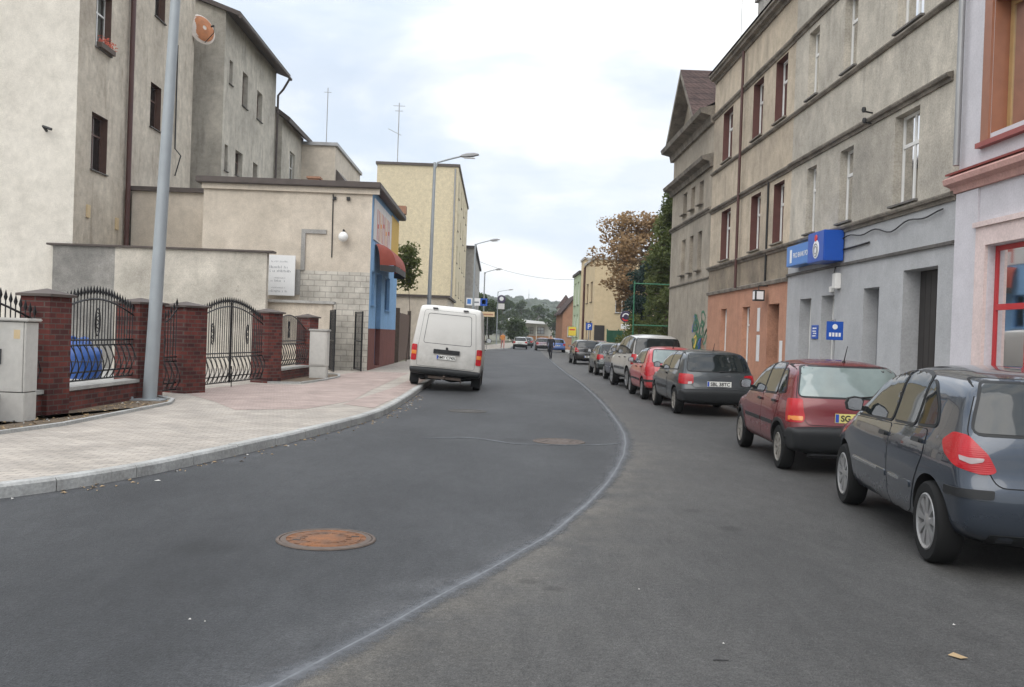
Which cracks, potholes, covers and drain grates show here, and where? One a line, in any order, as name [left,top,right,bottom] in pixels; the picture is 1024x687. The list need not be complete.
manhole cover [275,528,376,551]
